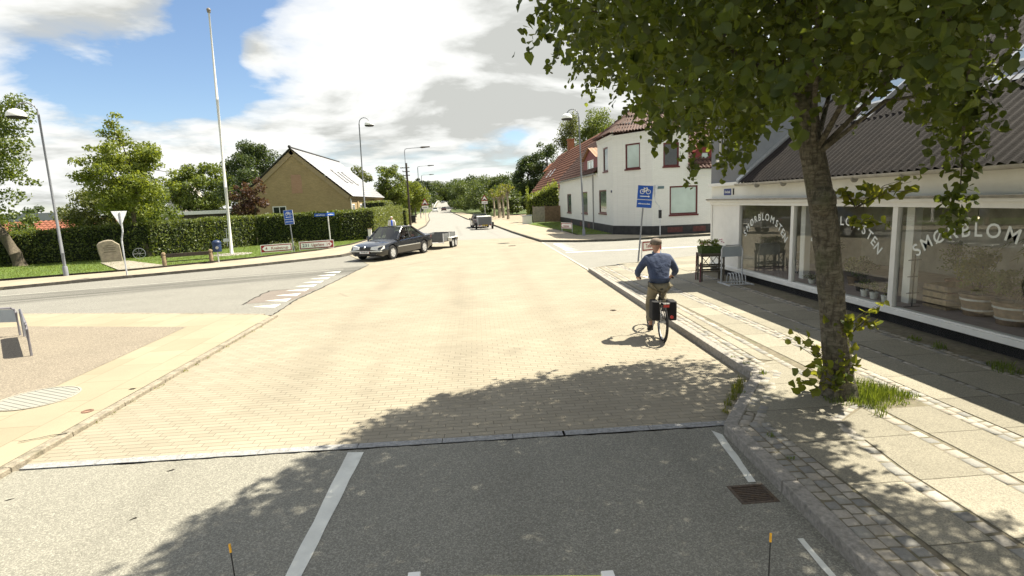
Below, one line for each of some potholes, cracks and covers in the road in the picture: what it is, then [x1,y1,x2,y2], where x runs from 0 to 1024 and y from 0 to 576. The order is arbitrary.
drain grate [726,483,780,505]
manhole cover [0,386,82,412]
